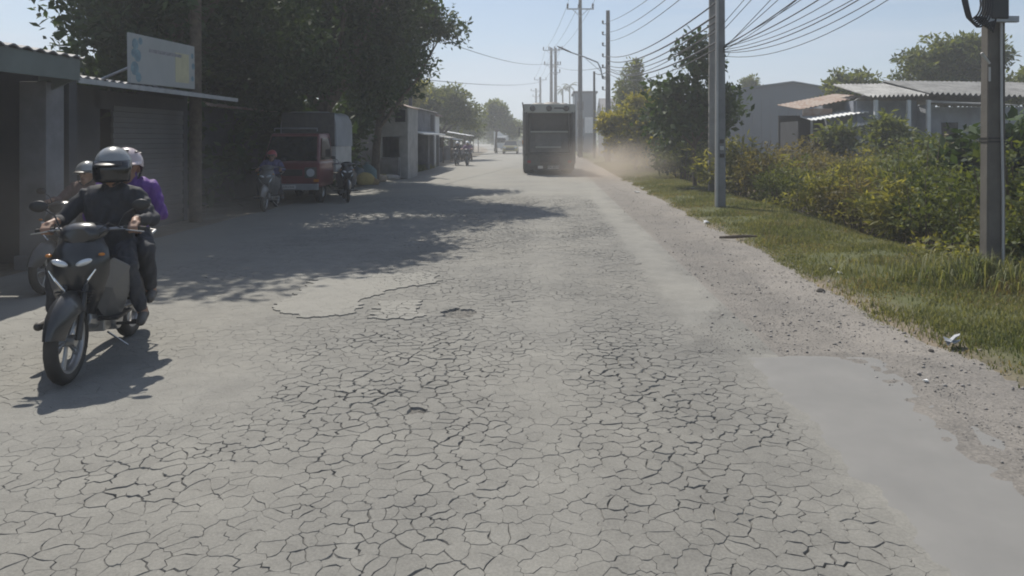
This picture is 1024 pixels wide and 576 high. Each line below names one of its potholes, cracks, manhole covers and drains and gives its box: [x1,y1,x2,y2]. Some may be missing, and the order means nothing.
pothole [443,310,476,319]
crack [523,195,927,576]
crack [104,195,557,576]
